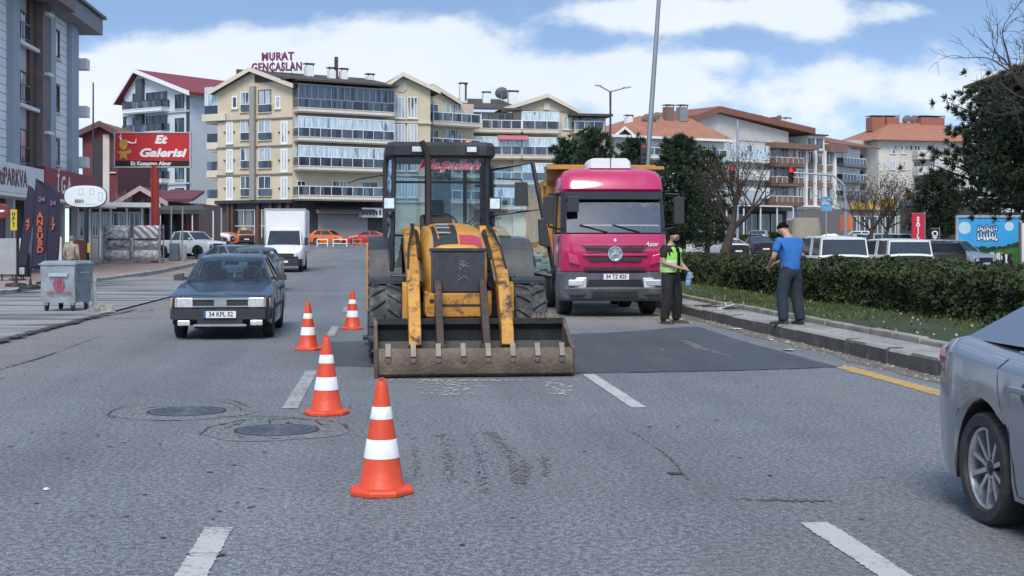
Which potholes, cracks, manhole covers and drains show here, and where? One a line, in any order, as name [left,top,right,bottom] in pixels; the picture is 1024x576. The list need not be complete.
manhole cover [111,403,260,420]
crack [624,429,690,480]
manhole cover [198,420,351,441]
